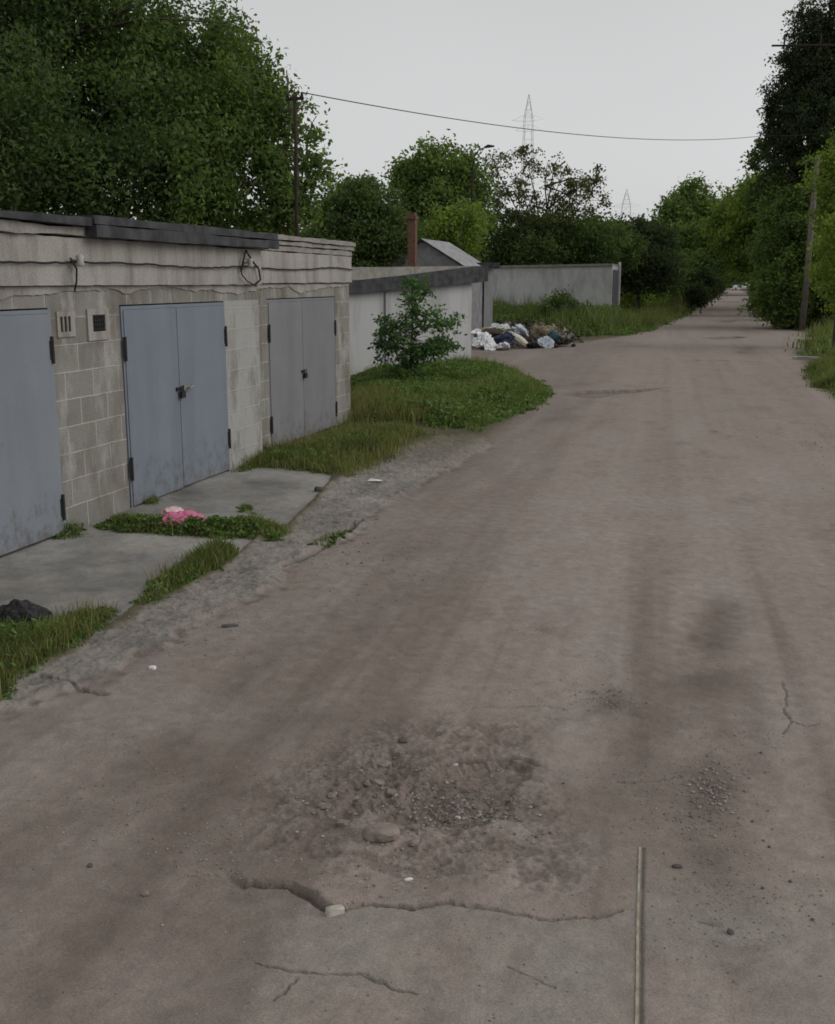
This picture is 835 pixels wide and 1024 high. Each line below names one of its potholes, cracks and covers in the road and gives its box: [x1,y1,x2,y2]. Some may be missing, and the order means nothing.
crack [35,673,108,696]
crack [781,682,819,735]
pothole [298,737,539,841]
crack [258,963,417,1002]
crack [216,867,623,922]
